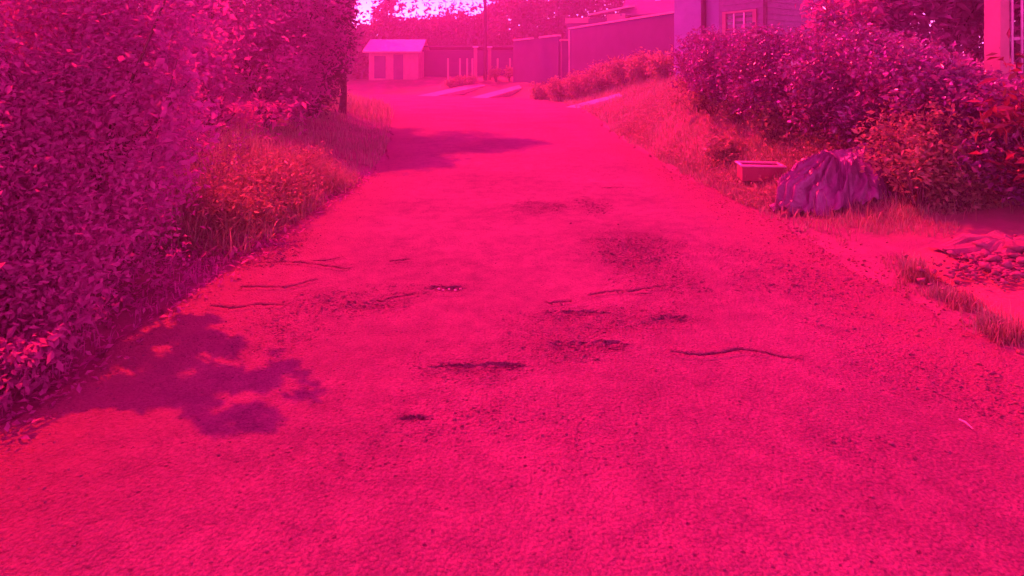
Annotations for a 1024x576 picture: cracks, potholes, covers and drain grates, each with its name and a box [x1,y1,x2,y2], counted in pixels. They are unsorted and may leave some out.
crack [205,256,354,312]
crack [377,289,420,303]
crack [544,283,670,306]
crack [669,344,803,366]
